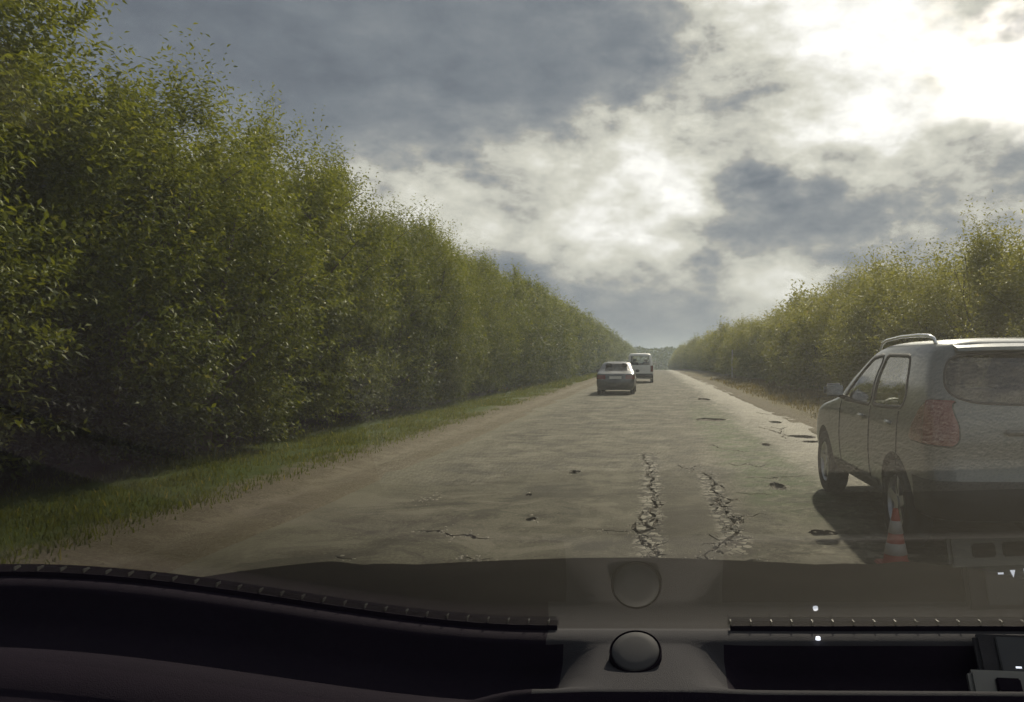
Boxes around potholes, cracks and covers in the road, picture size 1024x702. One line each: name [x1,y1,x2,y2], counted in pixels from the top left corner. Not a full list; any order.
pothole [768,482,792,491]
crack [583,444,808,562]
crack [411,526,494,559]
